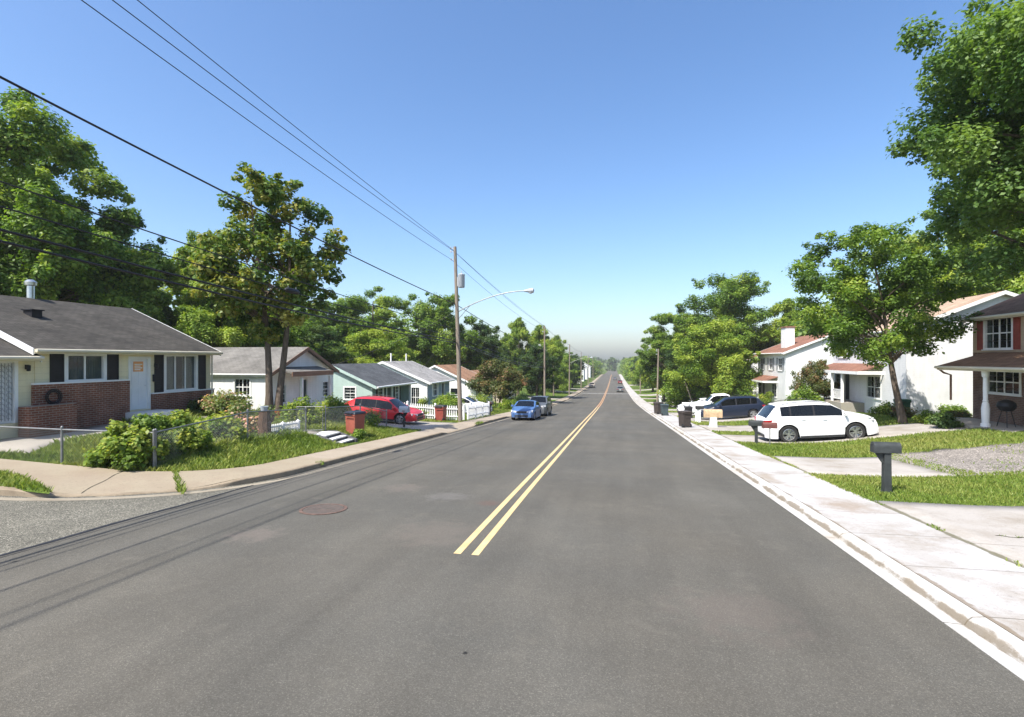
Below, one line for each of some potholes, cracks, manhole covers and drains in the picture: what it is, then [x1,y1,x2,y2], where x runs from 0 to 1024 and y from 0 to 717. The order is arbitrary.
manhole cover [299,504,347,515]
